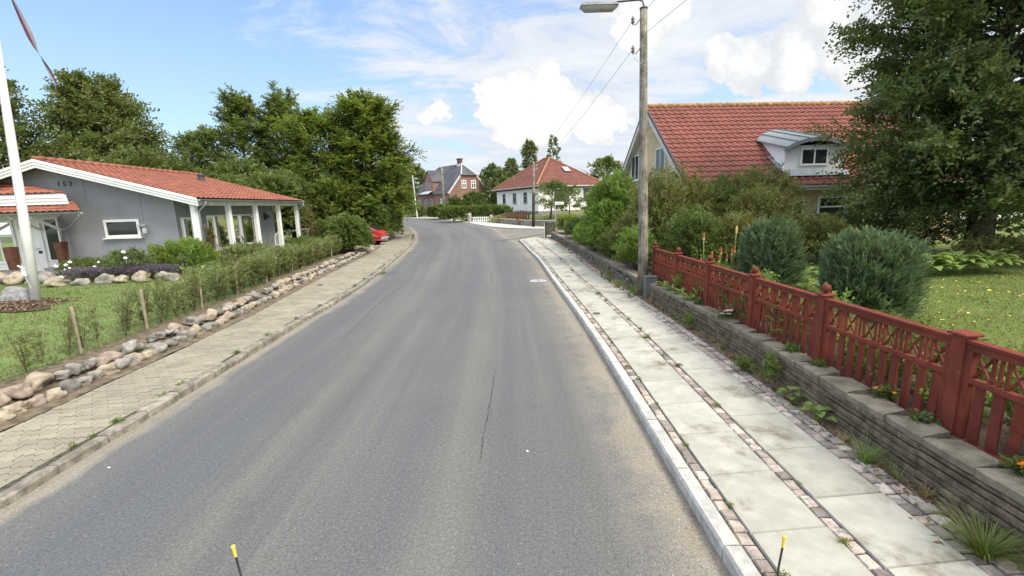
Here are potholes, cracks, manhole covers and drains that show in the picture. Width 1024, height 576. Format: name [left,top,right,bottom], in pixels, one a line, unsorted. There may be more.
crack [478,372,495,462]
